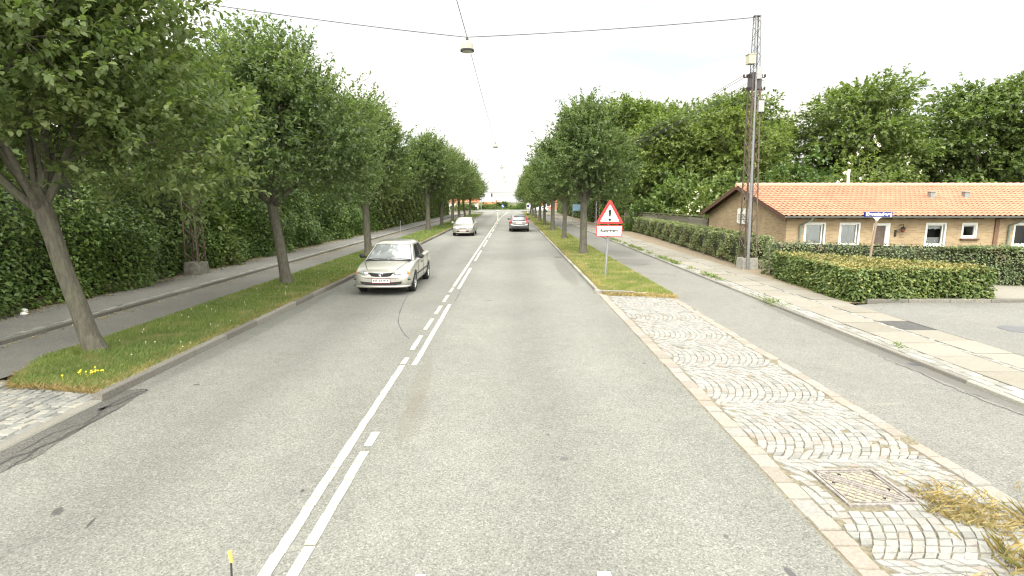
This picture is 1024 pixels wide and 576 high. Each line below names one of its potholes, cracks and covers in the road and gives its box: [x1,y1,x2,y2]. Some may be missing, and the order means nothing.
manhole cover [807,468,921,507]
